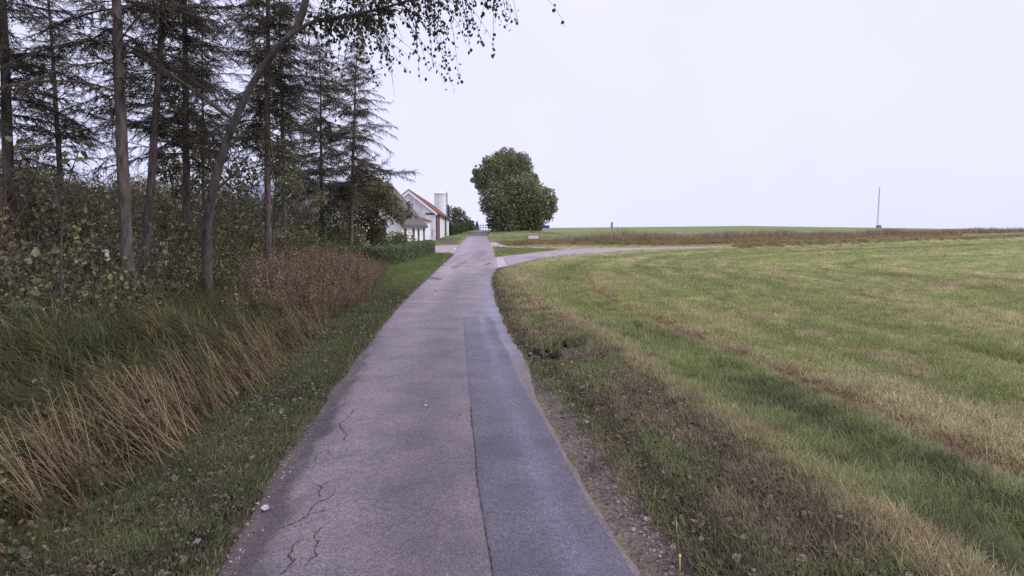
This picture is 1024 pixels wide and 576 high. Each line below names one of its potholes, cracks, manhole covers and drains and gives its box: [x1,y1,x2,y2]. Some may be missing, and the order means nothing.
crack [280,451,335,575]
